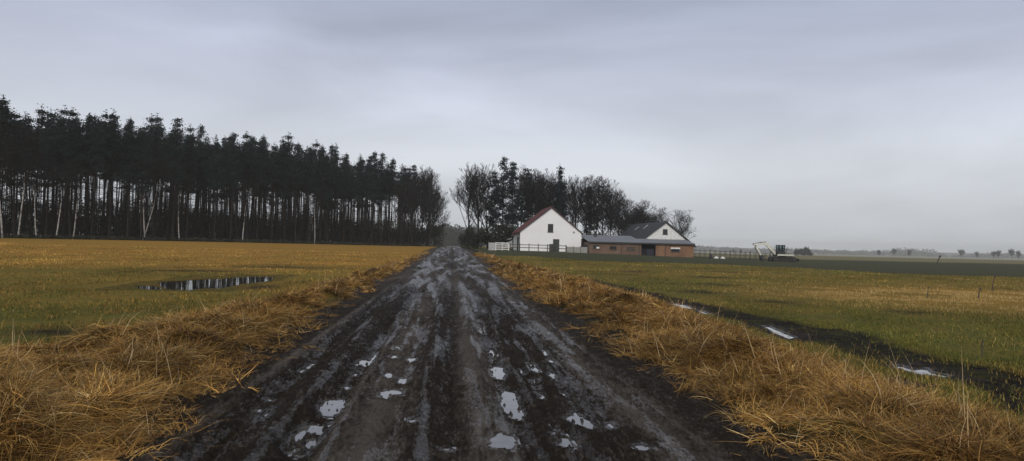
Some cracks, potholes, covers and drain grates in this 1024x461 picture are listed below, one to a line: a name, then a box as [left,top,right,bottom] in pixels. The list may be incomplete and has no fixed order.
pothole [301,386,358,425]
pothole [490,382,535,426]
